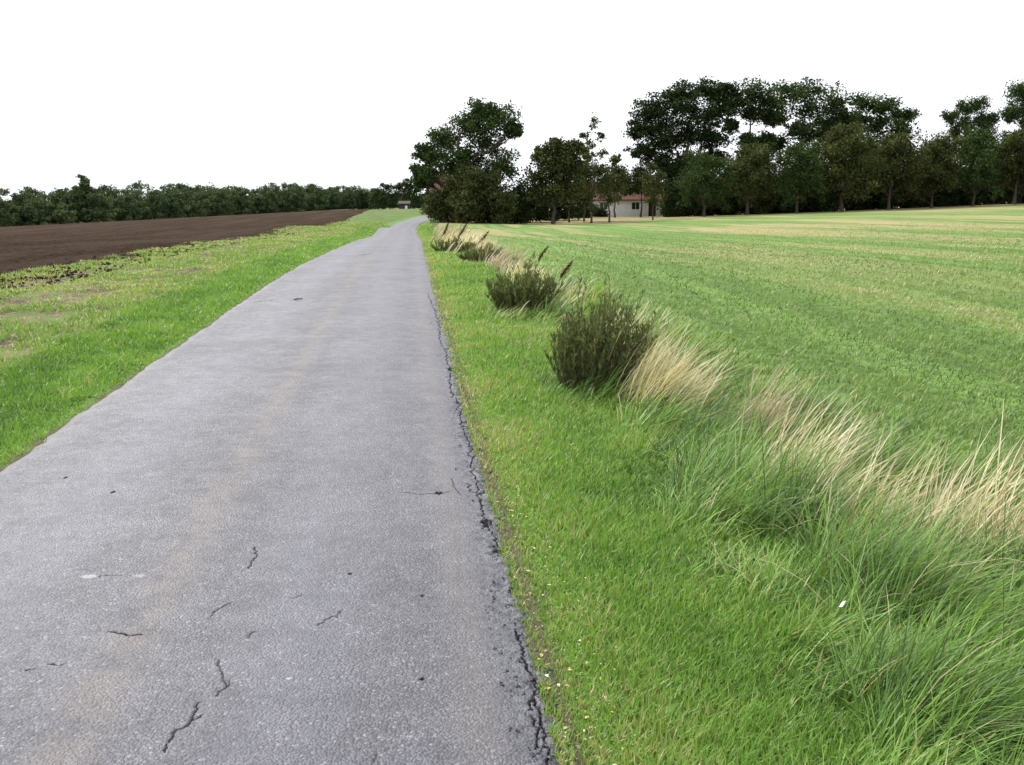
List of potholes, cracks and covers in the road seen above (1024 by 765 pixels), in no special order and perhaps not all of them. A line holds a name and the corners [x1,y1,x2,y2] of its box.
crack [403,294,501,553]
crack [164,660,229,753]
crack [516,633,560,765]
